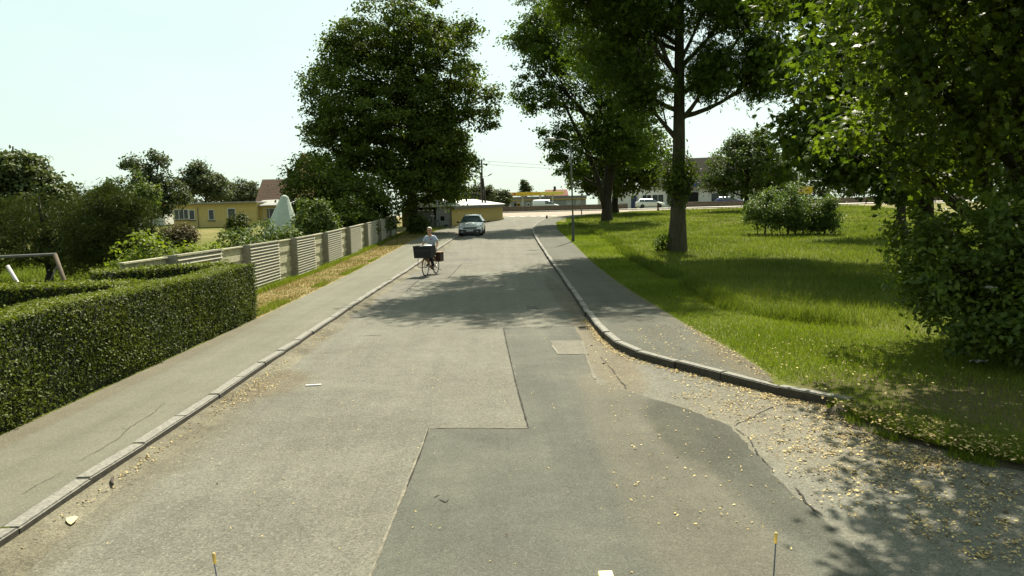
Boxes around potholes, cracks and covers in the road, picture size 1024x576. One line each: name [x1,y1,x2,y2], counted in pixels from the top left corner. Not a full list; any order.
crack [734,403,783,472]
crack [794,486,822,514]
